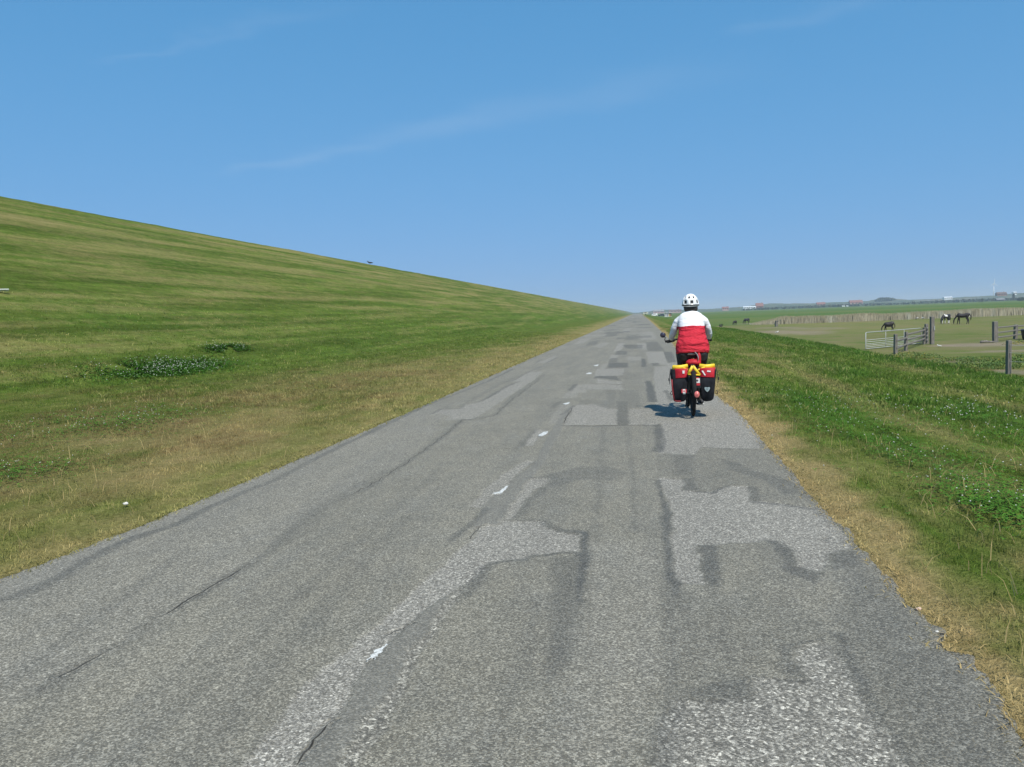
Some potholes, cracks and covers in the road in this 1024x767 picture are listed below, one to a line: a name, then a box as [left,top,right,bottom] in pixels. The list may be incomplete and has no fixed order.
crack [144,563,251,625]
crack [292,712,343,767]
crack [39,644,122,692]
crack [344,378,542,497]
